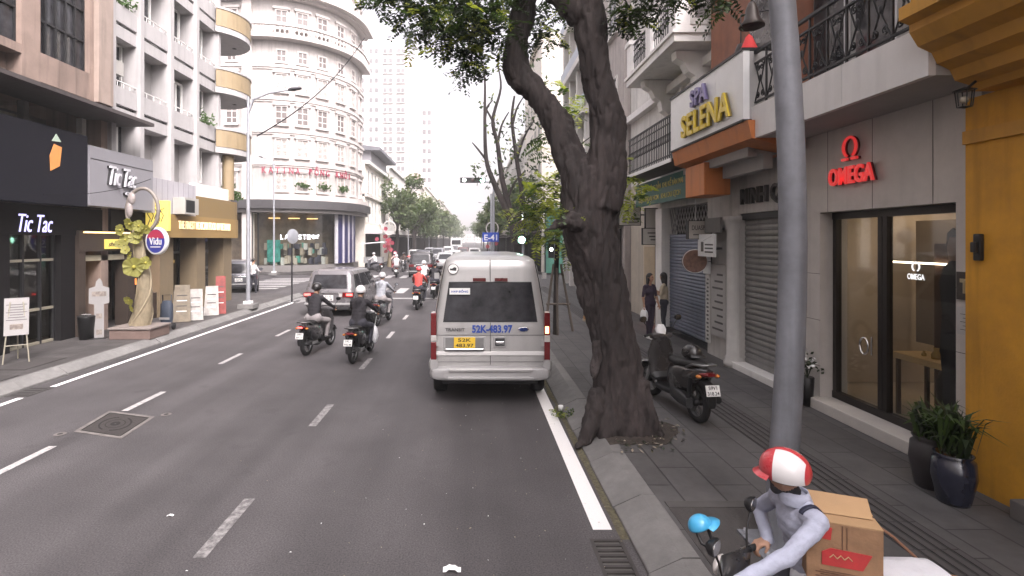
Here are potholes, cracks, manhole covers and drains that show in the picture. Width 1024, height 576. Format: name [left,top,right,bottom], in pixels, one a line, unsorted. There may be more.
manhole cover [53,411,172,439]
drain grate [589,539,640,576]
